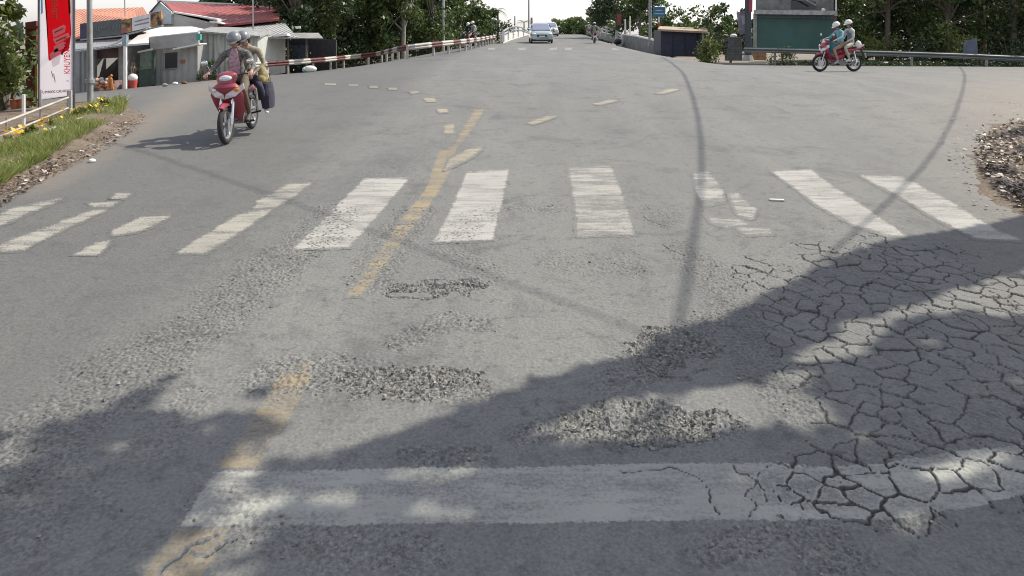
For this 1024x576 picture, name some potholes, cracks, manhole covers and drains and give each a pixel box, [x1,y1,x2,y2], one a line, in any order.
pothole [621,324,727,384]
pothole [378,278,490,301]
pothole [332,365,485,405]
pothole [558,398,747,451]
crack [616,228,1024,539]
crack [156,532,249,576]
